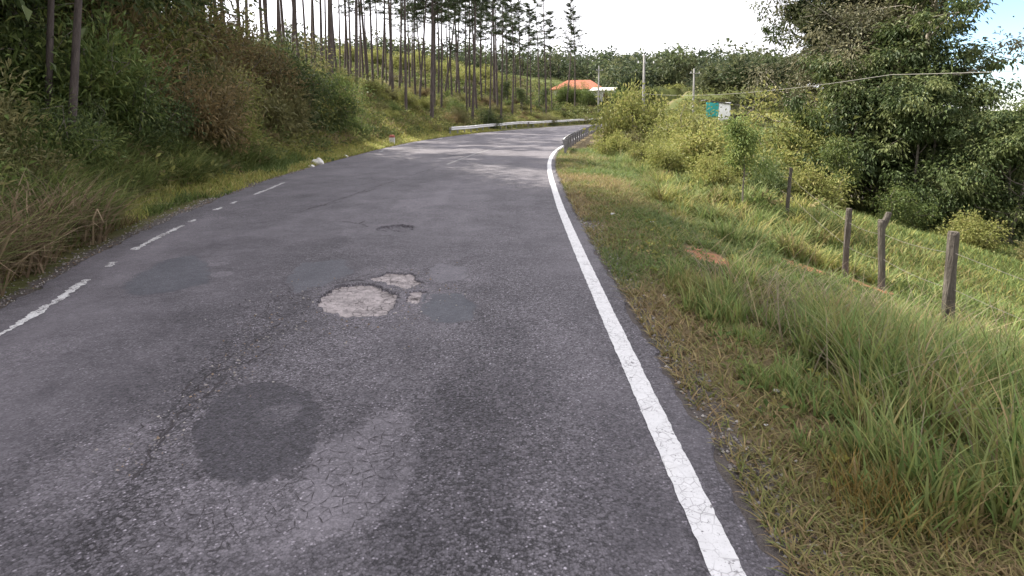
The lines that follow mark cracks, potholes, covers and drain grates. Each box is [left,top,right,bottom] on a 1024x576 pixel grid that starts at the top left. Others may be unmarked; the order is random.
crack [244,403,415,533]
pothole [364,271,429,291]
pothole [371,224,418,233]
crack [131,274,370,483]
pothole [309,281,408,321]
